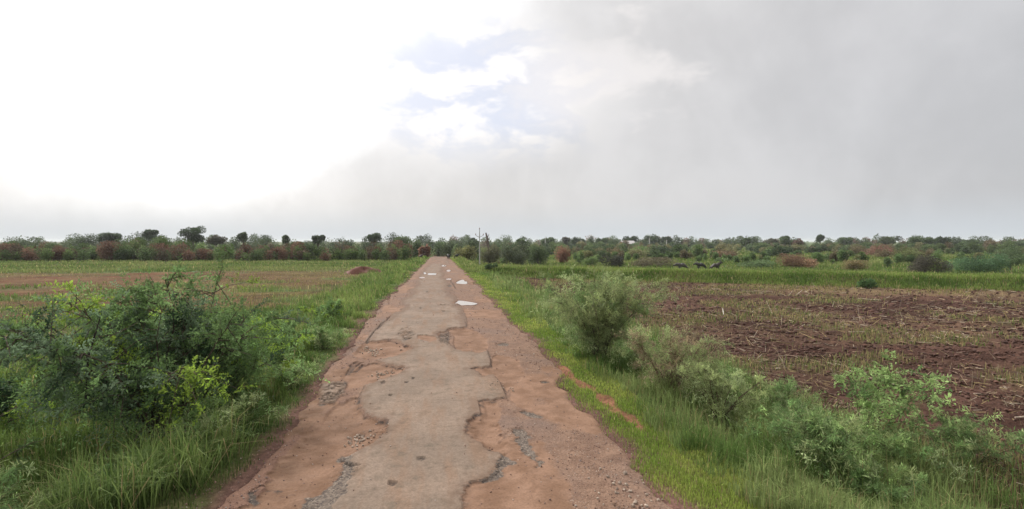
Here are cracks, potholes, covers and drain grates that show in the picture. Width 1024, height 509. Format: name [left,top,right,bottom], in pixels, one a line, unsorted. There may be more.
pothole [338,362,406,389]
pothole [509,426,547,473]
pothole [517,409,546,419]
